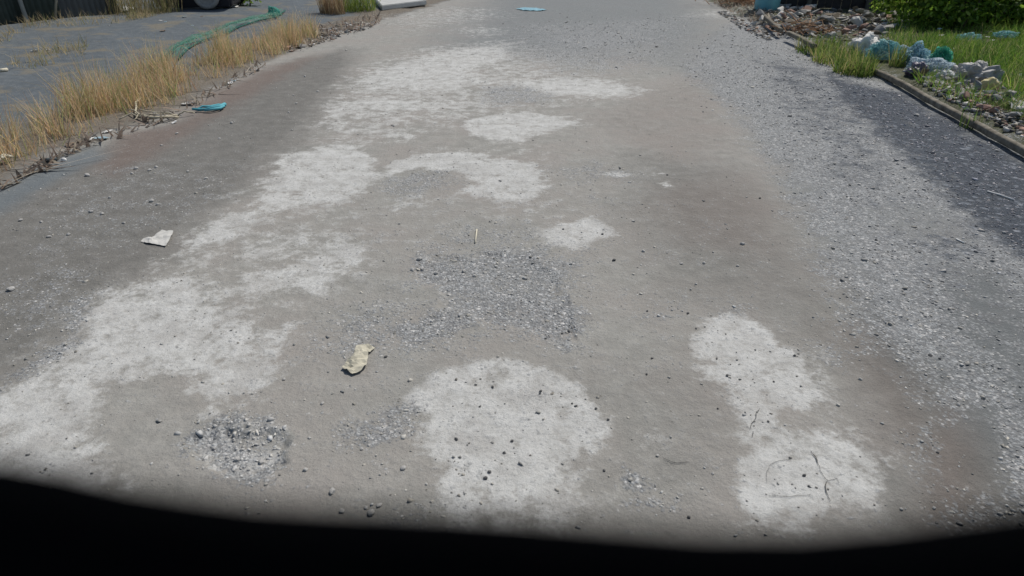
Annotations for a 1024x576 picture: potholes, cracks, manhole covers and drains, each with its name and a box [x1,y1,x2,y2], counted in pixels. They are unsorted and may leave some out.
pothole [411,250,579,346]
pothole [177,419,296,480]
